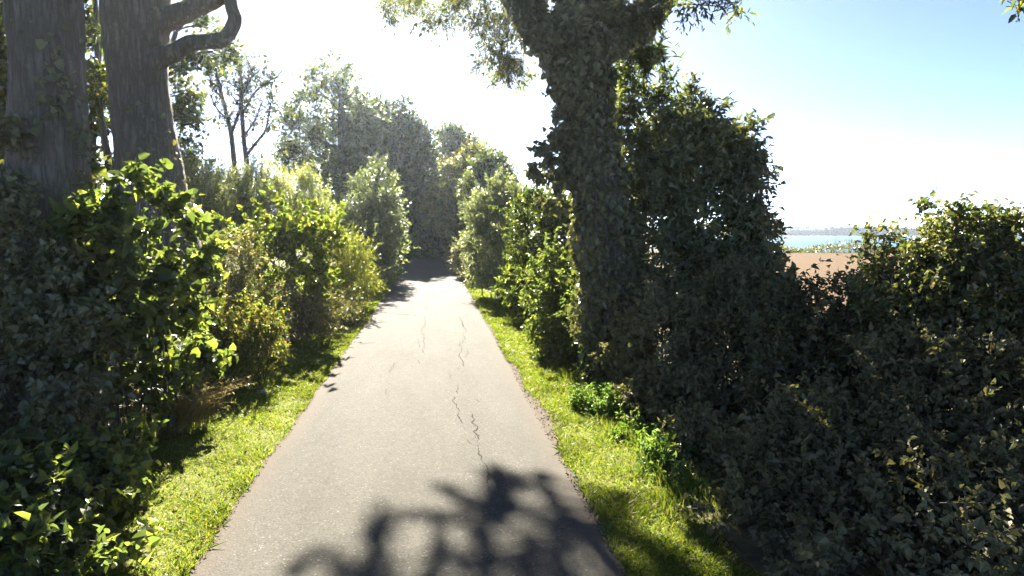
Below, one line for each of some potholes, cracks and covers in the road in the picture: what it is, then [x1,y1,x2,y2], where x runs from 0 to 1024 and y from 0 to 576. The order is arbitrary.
crack [450,306,490,484]
